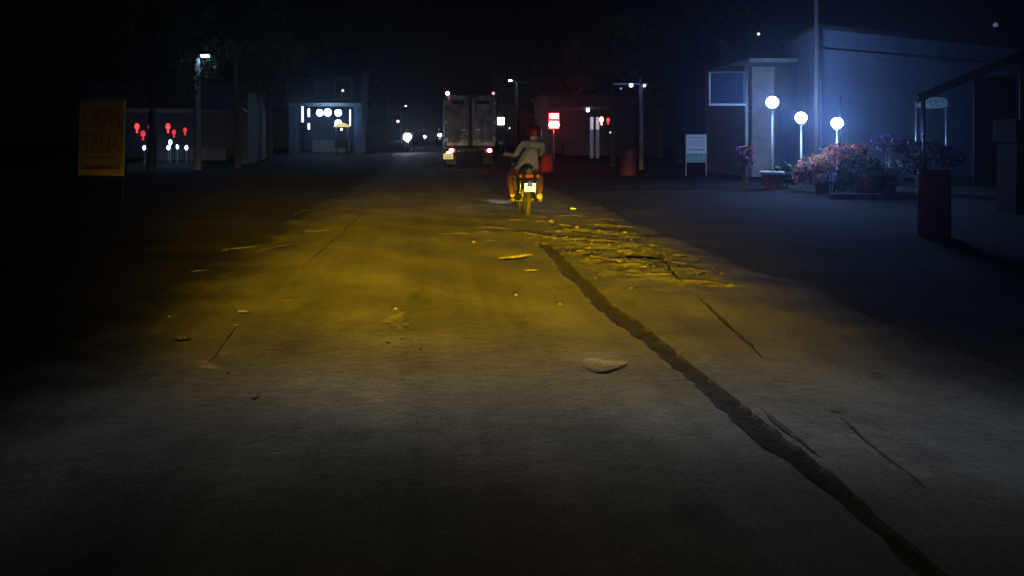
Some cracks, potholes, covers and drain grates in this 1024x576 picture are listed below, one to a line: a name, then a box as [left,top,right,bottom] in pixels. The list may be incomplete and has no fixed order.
crack [449,215,765,360]
crack [761,408,926,489]
crack [204,325,237,366]
crack [294,209,367,265]
